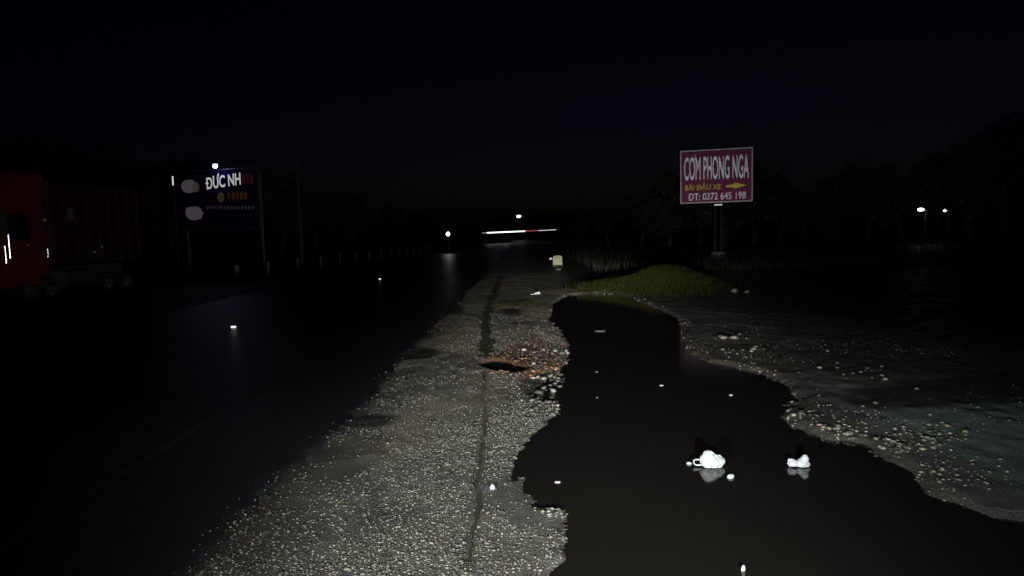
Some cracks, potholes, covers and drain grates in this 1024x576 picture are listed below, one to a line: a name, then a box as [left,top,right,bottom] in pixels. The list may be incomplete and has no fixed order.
pothole [510,291,1024,576]
pothole [401,345,442,361]
pothole [346,409,404,429]
crack [468,276,505,561]
pothole [478,359,529,372]
